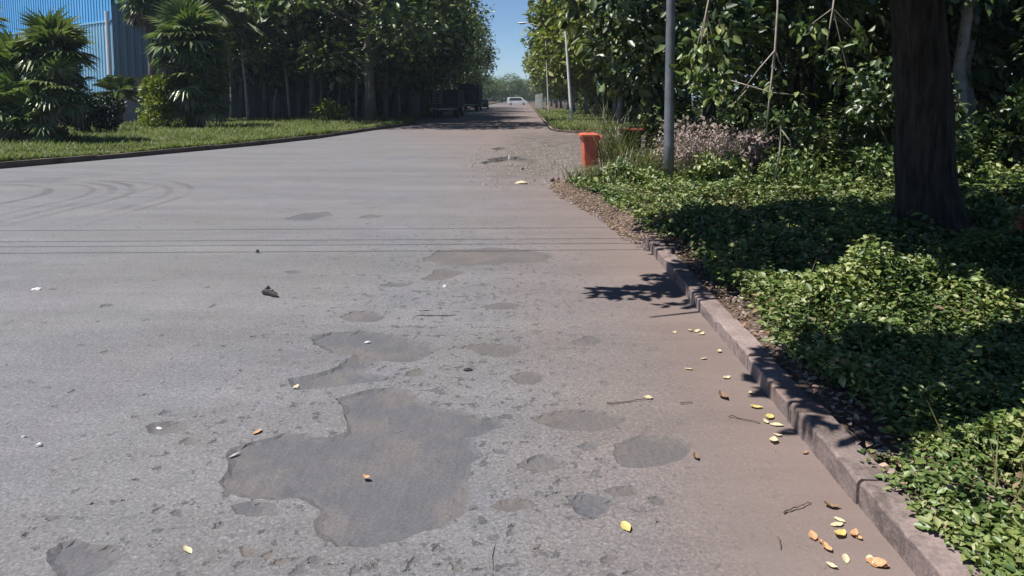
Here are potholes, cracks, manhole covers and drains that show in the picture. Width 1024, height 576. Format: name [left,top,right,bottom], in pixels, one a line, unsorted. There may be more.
pothole [481,155,533,165]
